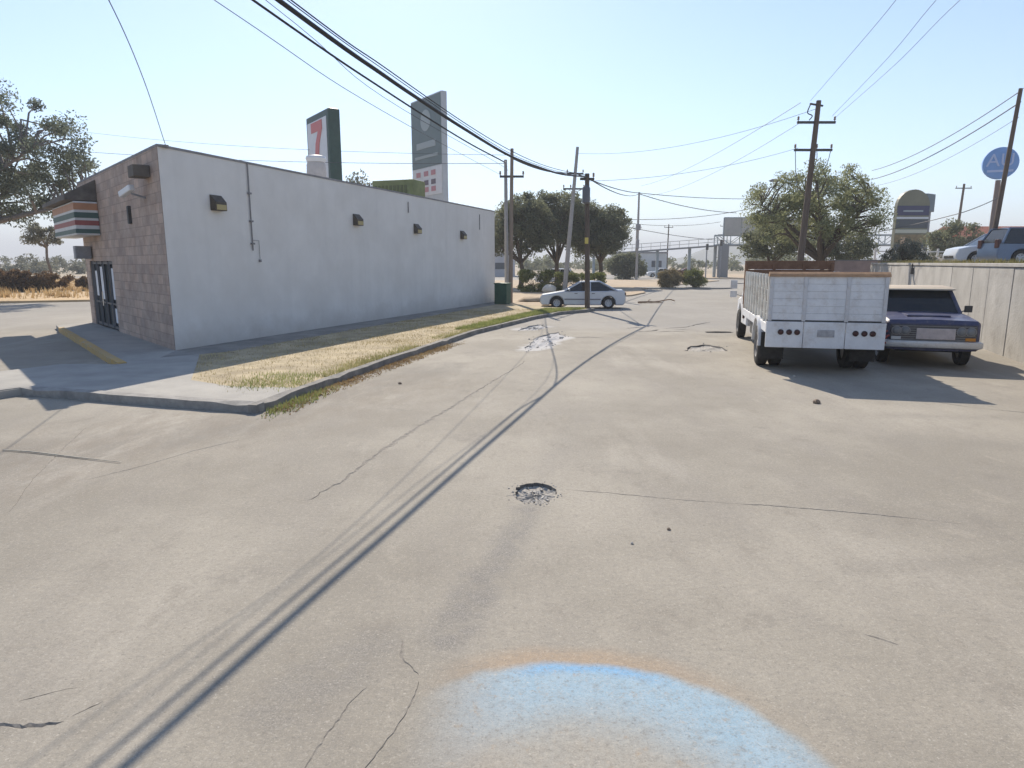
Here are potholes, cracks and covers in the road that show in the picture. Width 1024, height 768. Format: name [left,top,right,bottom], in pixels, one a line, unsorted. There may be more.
pothole [685,343,728,352]
crack [566,489,958,524]
crack [304,640,419,768]
pothole [507,481,562,506]
crack [0,686,103,729]
pothole [517,331,569,352]
